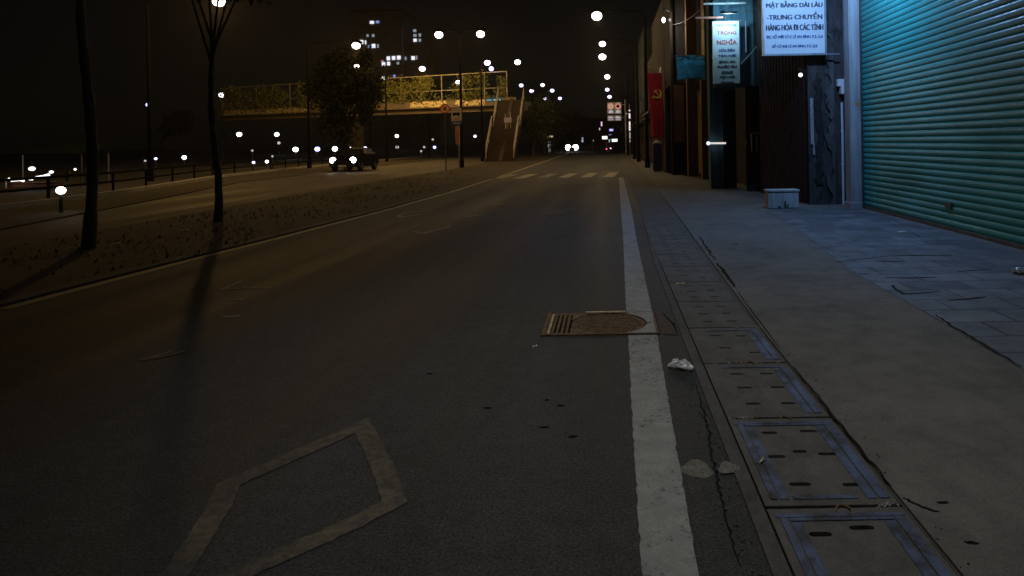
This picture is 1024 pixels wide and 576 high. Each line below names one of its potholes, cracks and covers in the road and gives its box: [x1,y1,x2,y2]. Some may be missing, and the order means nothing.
crack [699,236,780,348]
crack [696,384,741,566]
manhole cover [541,311,660,337]
crack [794,367,940,512]
crack [837,255,991,301]
